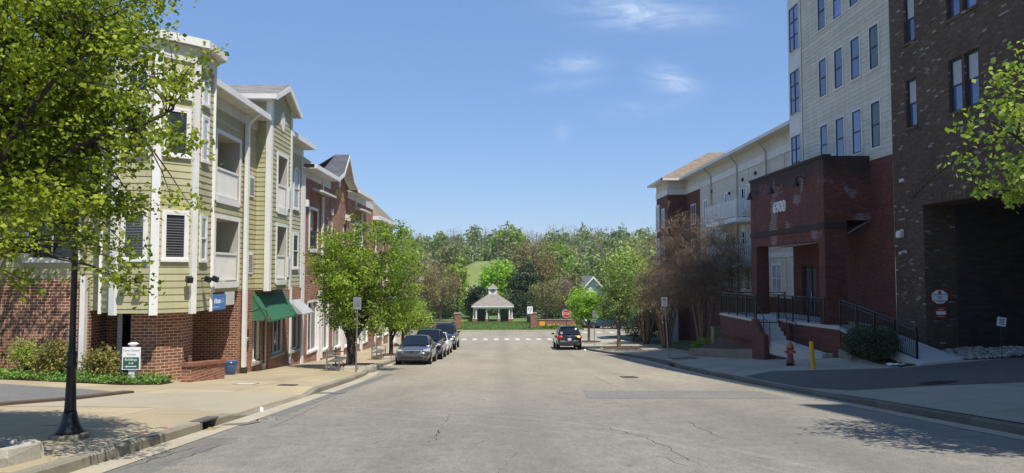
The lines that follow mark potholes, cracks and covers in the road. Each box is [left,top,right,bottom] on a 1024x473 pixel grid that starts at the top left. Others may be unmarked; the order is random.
drain grate [190,416,219,431]
crack [564,422,698,467]
